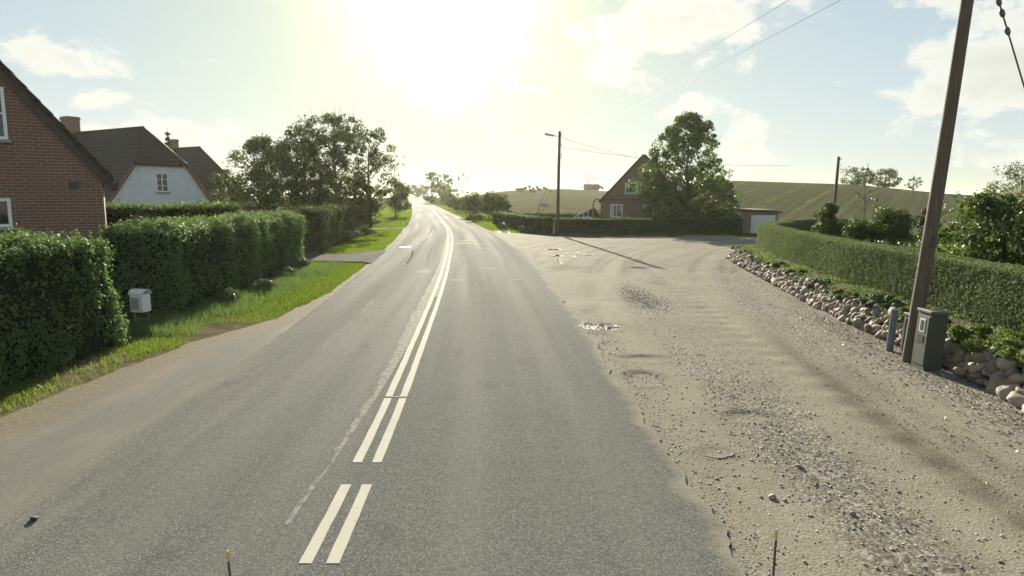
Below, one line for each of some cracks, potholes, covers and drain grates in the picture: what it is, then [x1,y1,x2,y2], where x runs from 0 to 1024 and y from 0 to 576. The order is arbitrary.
pothole [575,323,620,331]
pothole [626,372,664,386]
